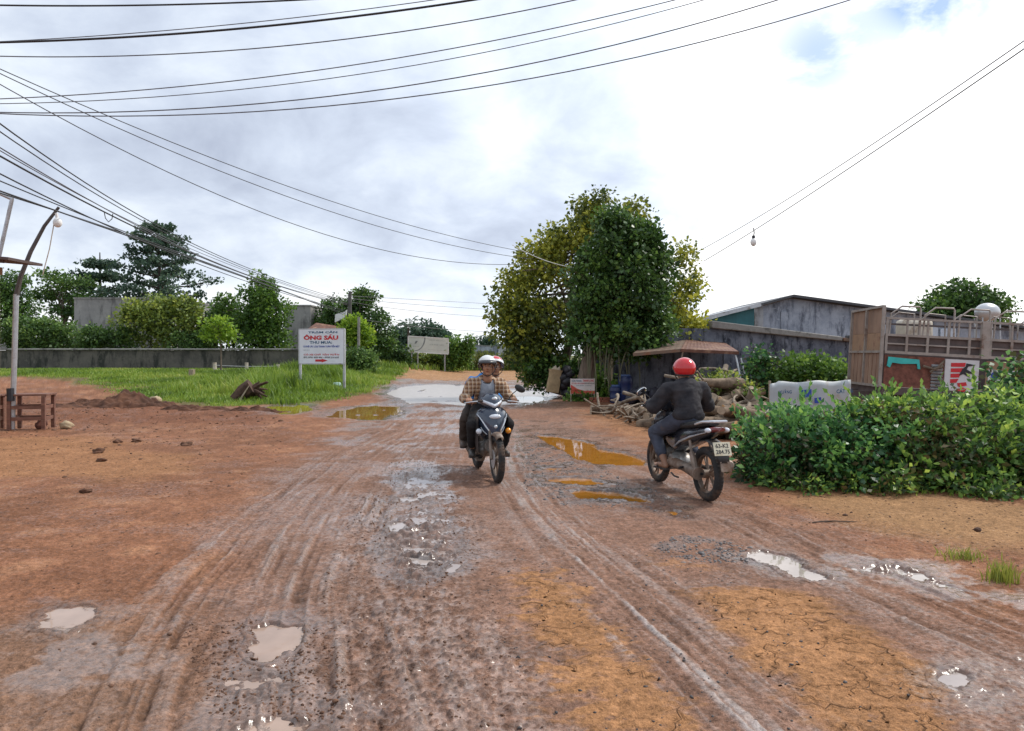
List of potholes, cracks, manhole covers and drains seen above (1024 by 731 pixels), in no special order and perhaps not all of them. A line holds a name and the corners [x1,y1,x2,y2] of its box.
pothole [23,600,109,638]
pothole [559,487,666,506]
pothole [518,433,657,469]
pothole [386,493,429,505]
pothole [924,663,987,698]
pothole [236,618,313,667]
pothole [534,475,617,487]
pothole [736,547,835,586]
pothole [406,550,444,569]
pothole [376,520,422,536]
crack [521,574,684,731]
crack [696,588,945,731]
